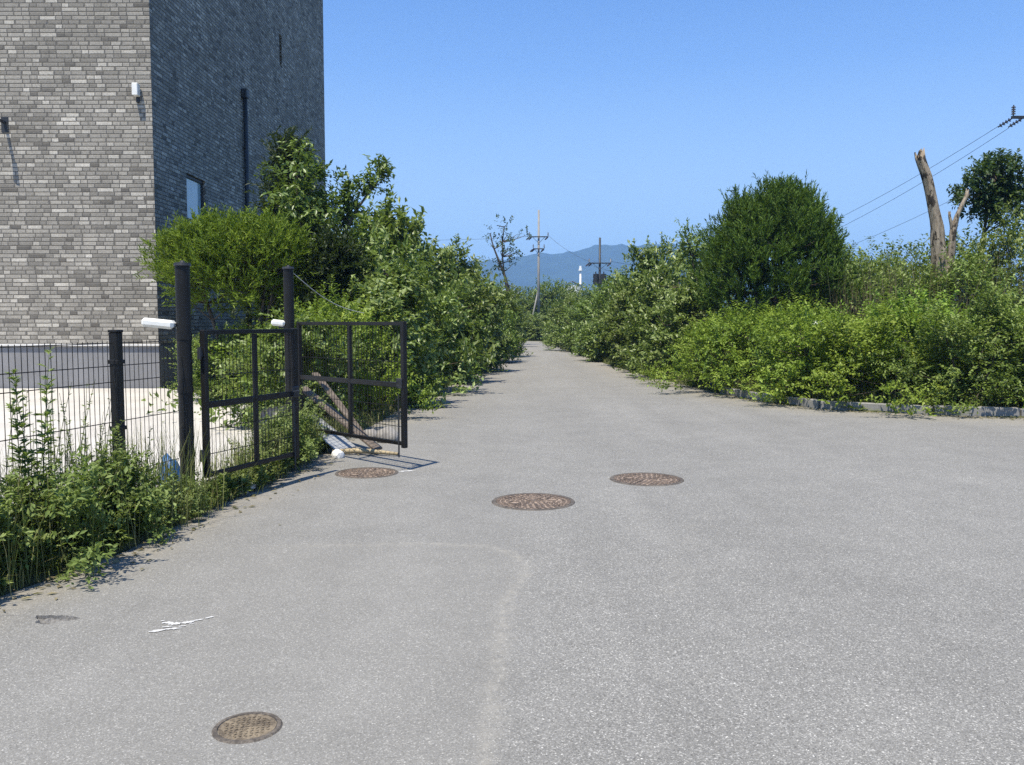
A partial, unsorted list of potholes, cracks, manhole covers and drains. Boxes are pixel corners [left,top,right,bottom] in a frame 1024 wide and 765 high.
manhole cover [335,467,399,479]
manhole cover [492,493,575,511]
manhole cover [211,712,283,744]
manhole cover [610,472,684,486]
